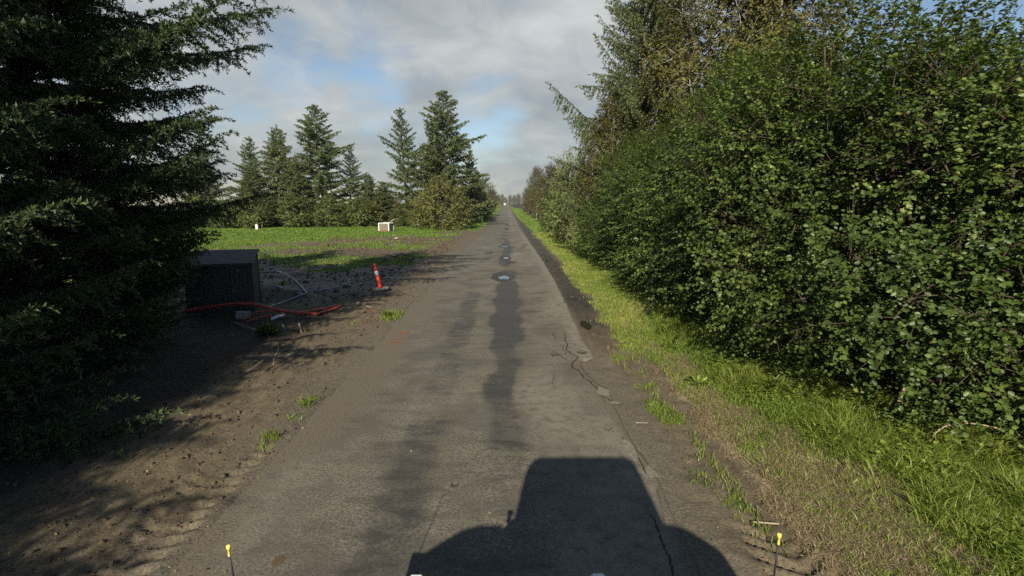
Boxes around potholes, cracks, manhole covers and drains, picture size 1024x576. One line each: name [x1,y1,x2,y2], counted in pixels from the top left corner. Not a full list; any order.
pothole [490,272,516,282]
crack [653,517,674,576]
crack [552,334,611,402]
